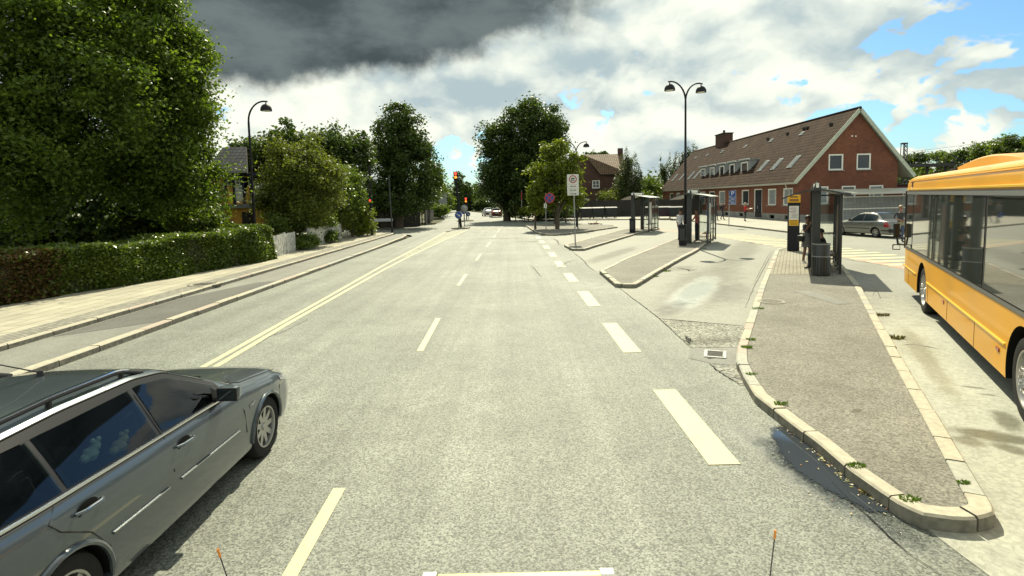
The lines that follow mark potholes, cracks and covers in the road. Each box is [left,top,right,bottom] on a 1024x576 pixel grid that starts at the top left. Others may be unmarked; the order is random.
drain grate [704,349,726,359]
